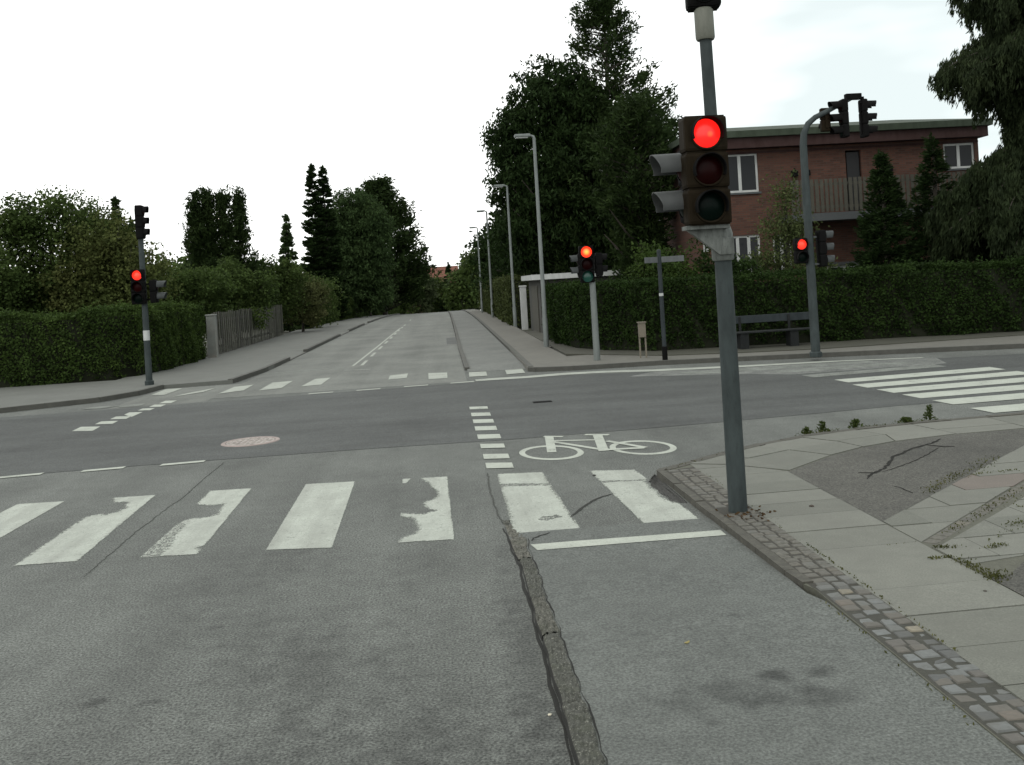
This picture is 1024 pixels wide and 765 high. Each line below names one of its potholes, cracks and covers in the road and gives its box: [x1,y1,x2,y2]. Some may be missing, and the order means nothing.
manhole cover [221,436,280,447]
crack [858,439,954,493]
crack [531,494,611,541]
crack [487,473,503,523]
